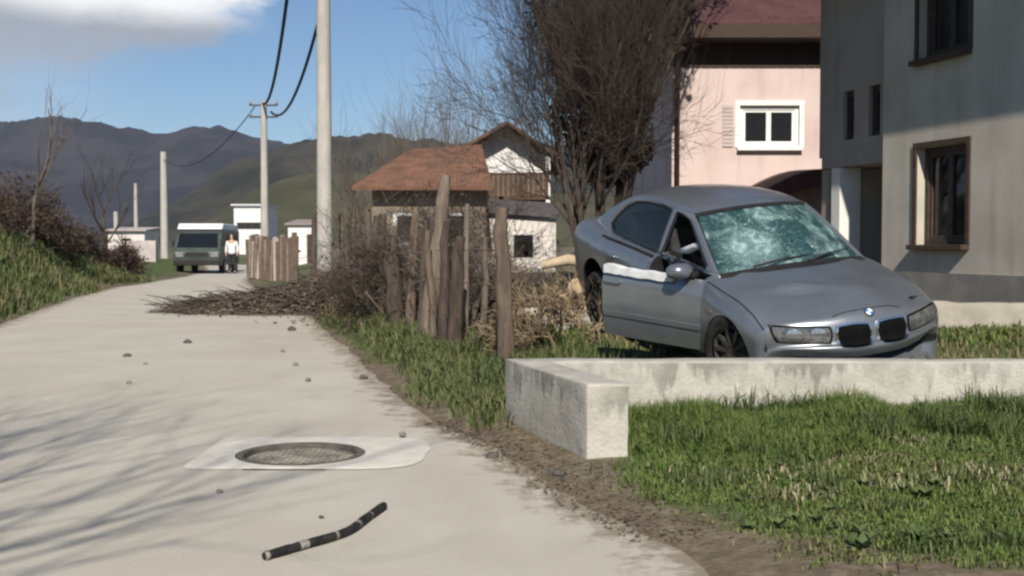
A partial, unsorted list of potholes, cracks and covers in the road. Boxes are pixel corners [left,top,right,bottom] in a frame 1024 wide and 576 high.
manhole cover [236,442,365,466]
